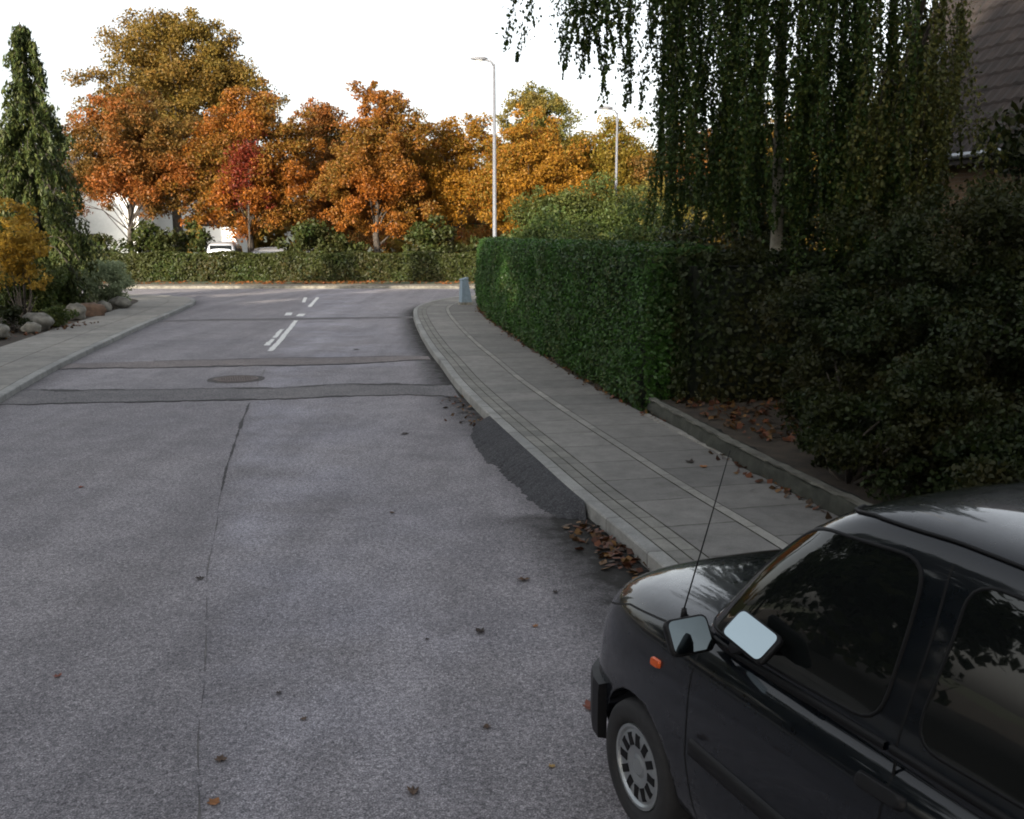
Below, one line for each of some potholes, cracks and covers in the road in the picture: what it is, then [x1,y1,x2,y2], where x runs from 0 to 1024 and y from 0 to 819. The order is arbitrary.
crack [0,356,470,819]
manhole cover [207,375,265,383]
